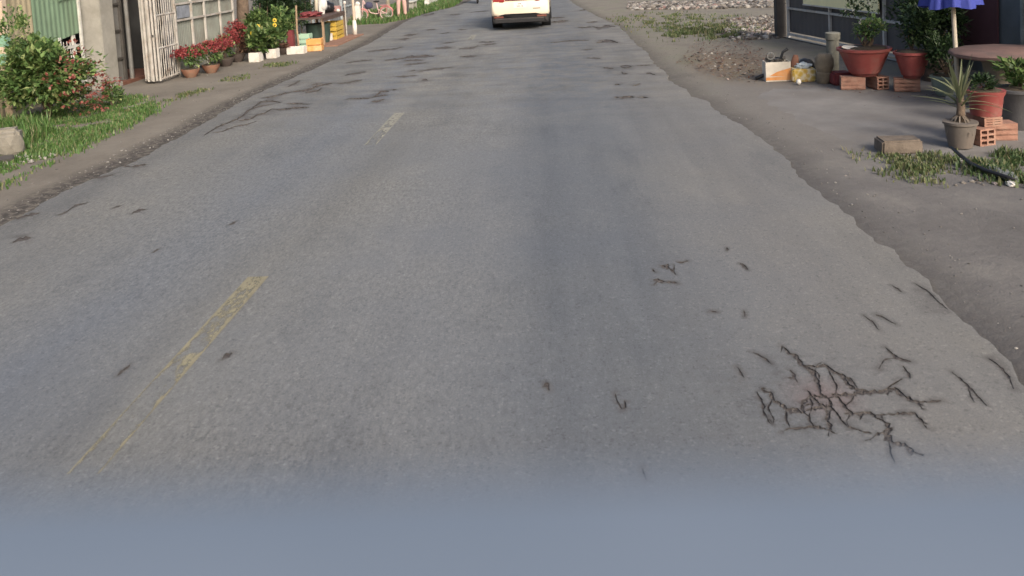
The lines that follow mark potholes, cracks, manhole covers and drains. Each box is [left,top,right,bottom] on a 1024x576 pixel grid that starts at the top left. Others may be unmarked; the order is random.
crack [204,81,310,136]
crack [952,359,1013,406]
crack [737,346,940,463]
crack [550,40,655,86]
crack [338,13,496,91]
crack [653,261,687,284]
